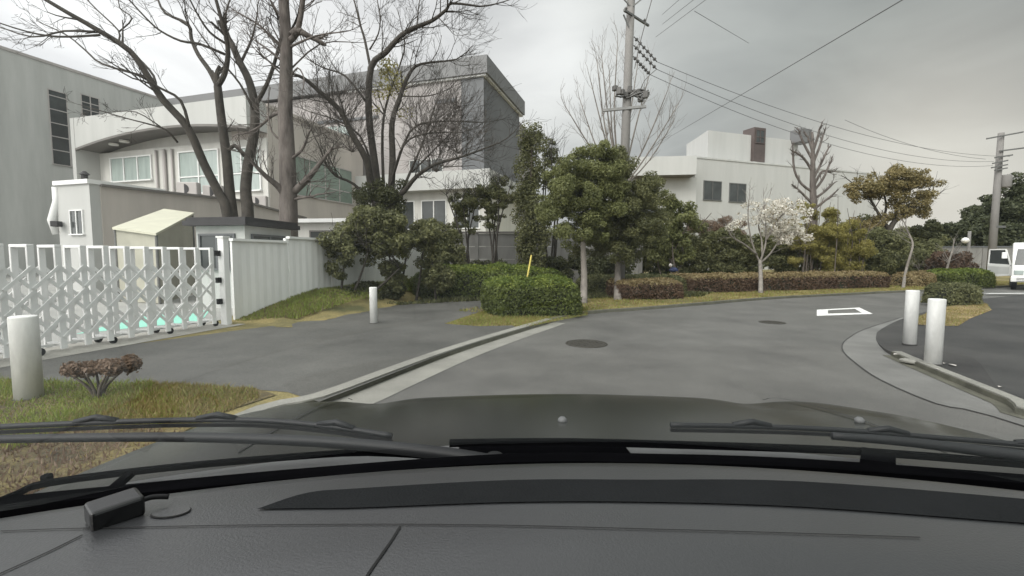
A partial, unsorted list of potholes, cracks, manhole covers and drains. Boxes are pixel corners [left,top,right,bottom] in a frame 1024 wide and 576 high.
manhole cover [565,339,608,348]
